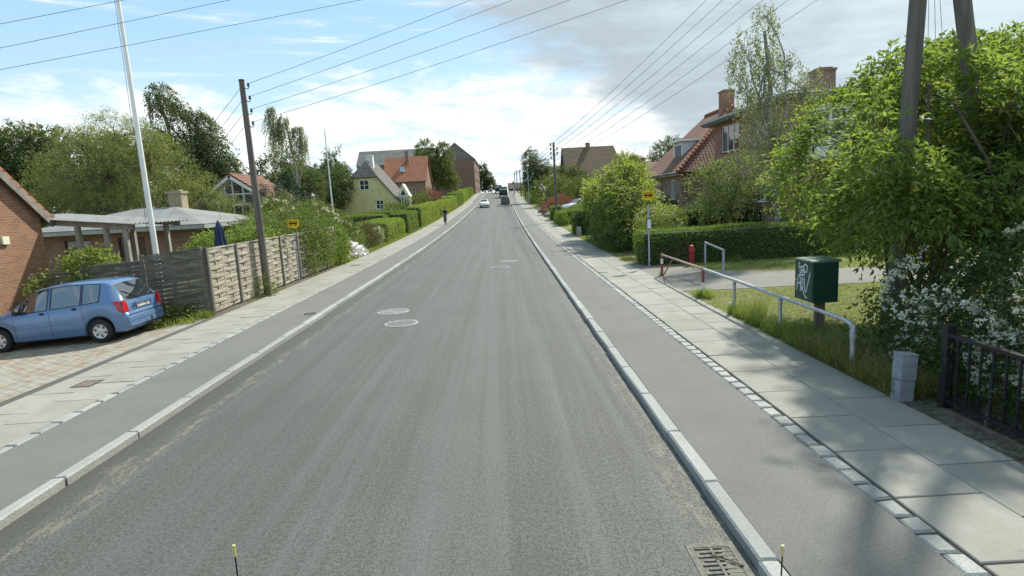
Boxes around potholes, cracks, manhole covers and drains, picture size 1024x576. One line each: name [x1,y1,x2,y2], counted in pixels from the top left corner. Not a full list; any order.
drain grate [684,541,754,576]
utility cover [70,380,103,388]
